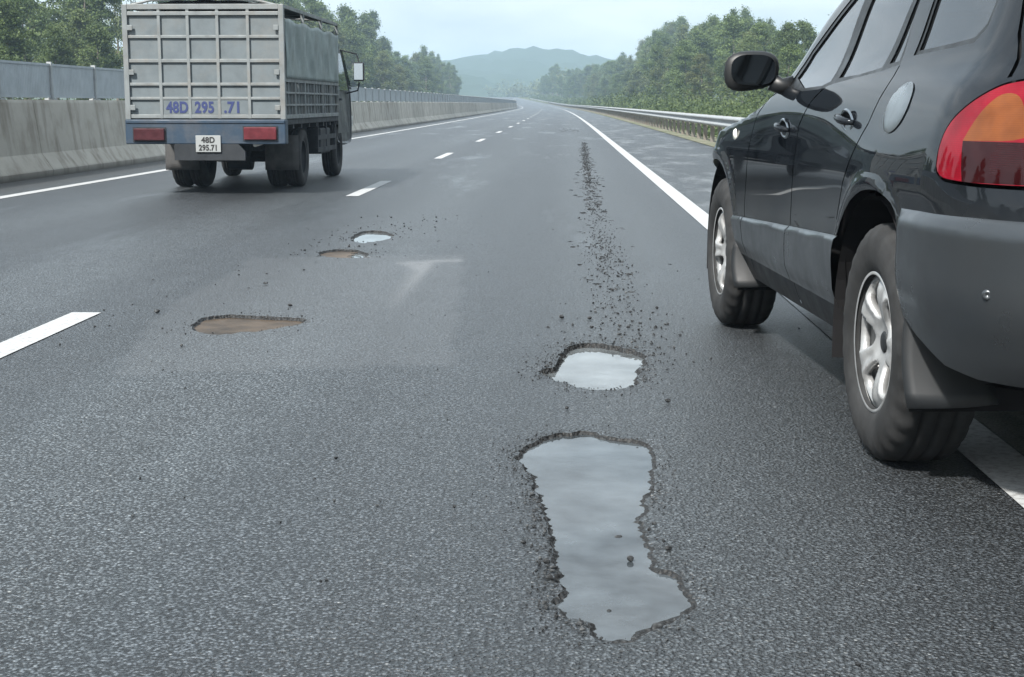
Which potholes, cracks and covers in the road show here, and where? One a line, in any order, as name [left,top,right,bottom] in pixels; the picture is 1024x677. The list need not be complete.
pothole [351,230,394,243]
pothole [190,314,307,335]
pothole [538,343,647,390]
pothole [513,430,698,644]
pothole [318,249,369,258]
